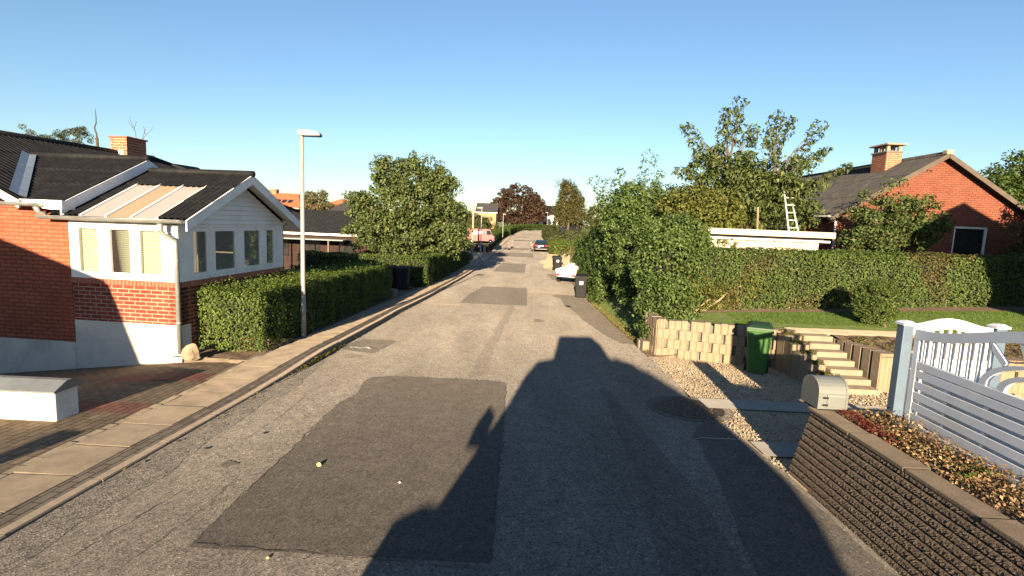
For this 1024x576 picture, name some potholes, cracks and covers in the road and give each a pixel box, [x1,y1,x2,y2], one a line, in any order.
manhole cover [654,398,725,419]
